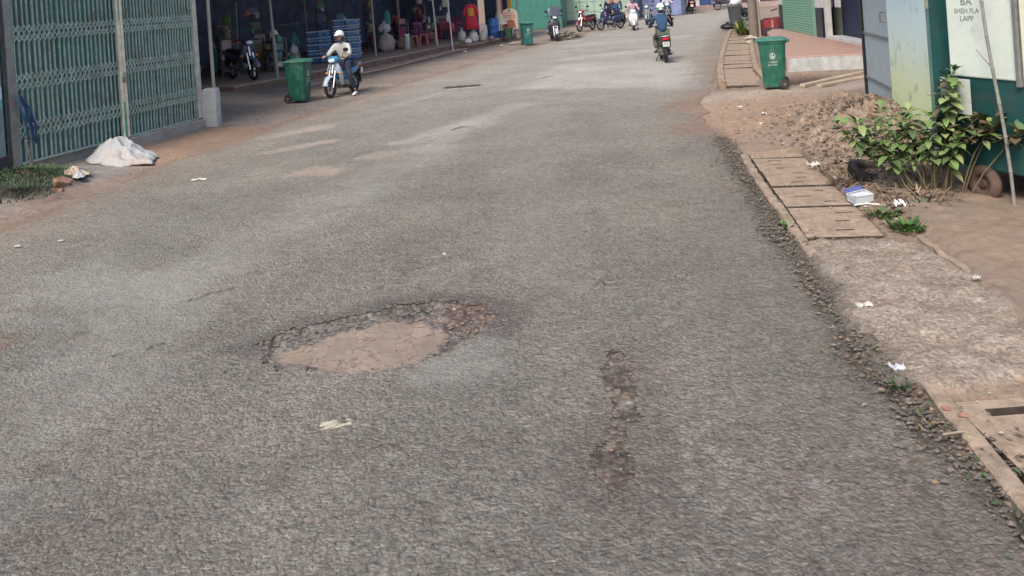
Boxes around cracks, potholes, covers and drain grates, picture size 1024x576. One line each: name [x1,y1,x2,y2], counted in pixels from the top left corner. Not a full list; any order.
crack [112,335,196,357]
pothole [246,296,514,378]
pothole [589,350,643,503]
crack [188,287,235,301]
